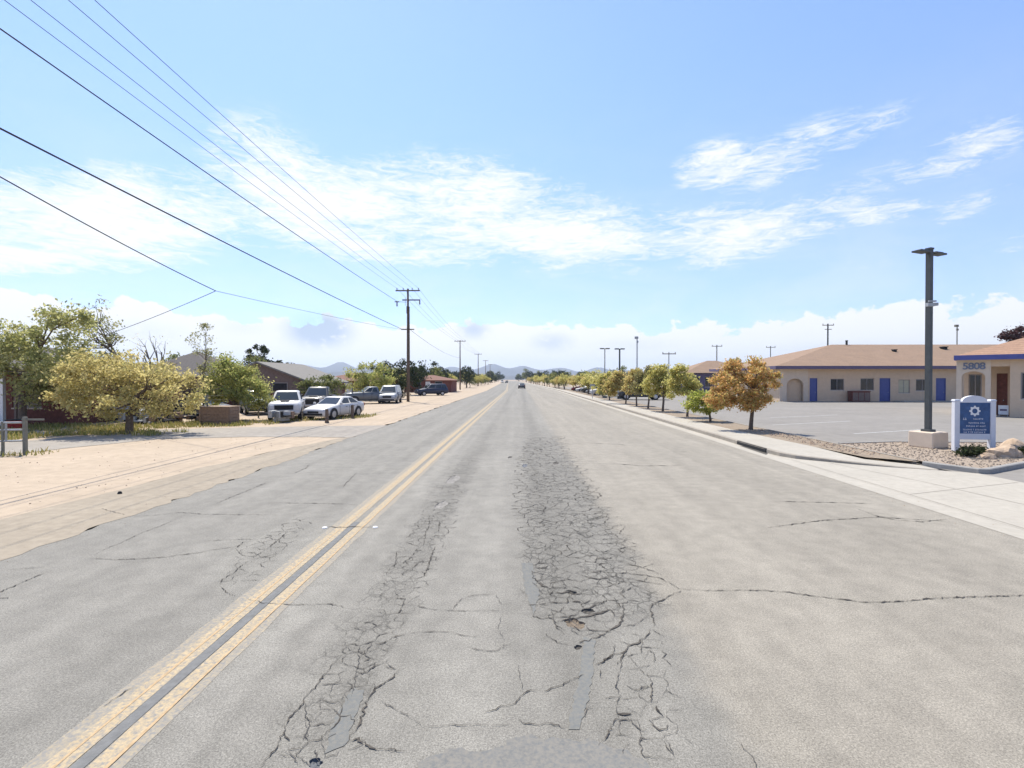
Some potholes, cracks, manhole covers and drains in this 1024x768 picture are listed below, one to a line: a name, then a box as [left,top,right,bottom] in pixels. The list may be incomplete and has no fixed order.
pothole [564,618,586,629]
crack [92,436,689,765]
crack [780,501,952,526]
crack [679,588,1020,602]
